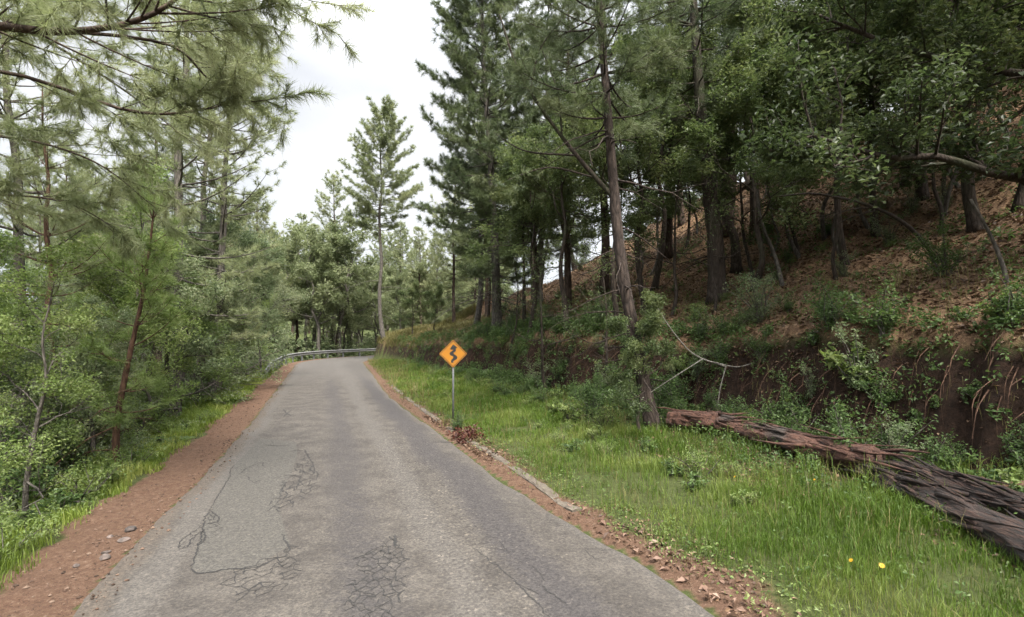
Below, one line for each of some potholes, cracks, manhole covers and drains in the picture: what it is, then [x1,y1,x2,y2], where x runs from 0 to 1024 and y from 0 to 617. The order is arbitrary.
crack [343,535,410,617]
crack [477,540,567,617]
crack [178,445,321,602]
